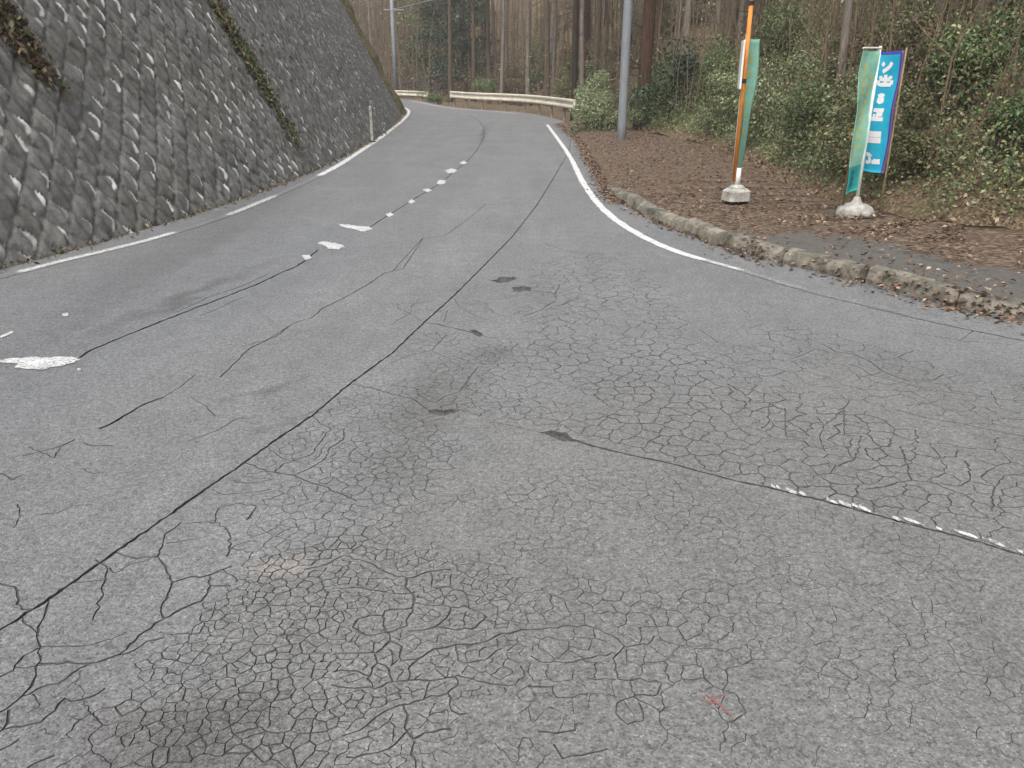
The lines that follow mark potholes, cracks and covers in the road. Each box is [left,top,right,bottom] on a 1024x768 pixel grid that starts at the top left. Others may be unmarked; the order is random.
crack [78,250,318,358]
crack [394,278,512,339]
crack [0,332,1024,768]
crack [219,204,486,378]
pothole [542,430,575,442]
crack [508,244,701,377]
